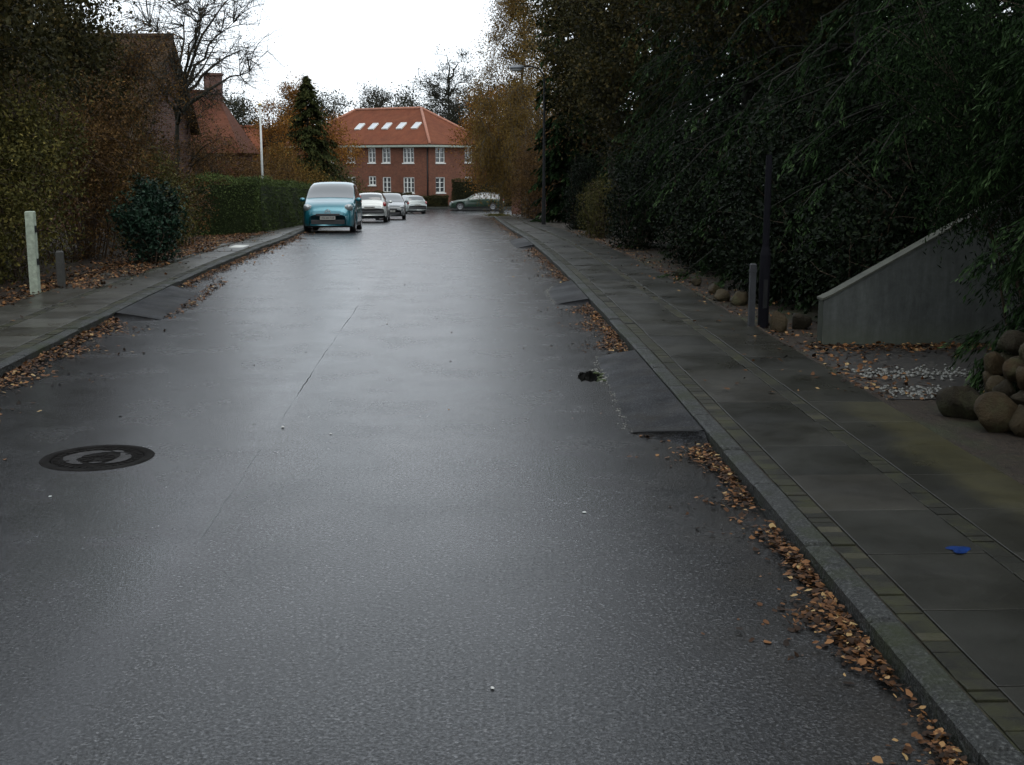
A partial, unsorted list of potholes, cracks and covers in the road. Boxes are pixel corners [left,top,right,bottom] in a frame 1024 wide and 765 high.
manhole cover [39,445,155,471]
pothole [578,369,609,382]
crack [196,305,359,547]
